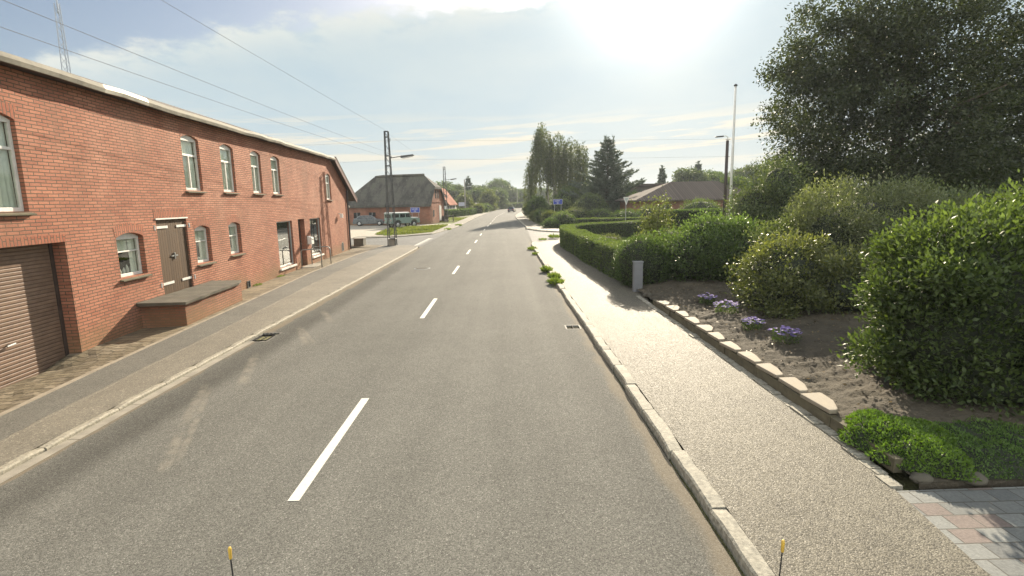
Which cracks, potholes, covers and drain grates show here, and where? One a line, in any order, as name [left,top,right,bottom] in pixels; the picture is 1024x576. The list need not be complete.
drain grate [249,332,283,342]
